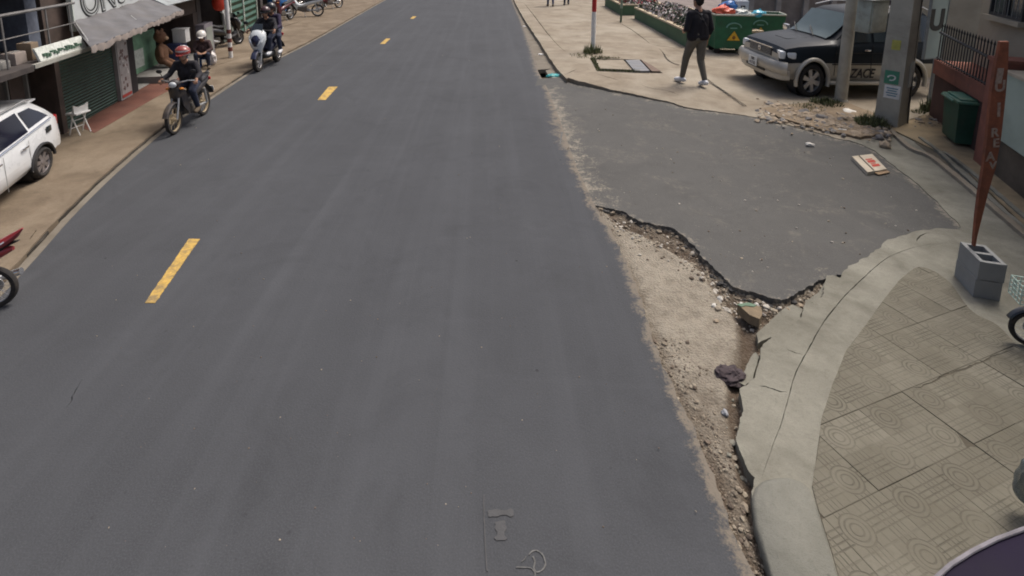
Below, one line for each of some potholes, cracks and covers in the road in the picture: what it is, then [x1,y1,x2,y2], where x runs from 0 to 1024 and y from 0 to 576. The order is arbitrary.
manhole cover [591,60,660,73]
crack [708,79,746,107]
pothole [596,207,825,576]
